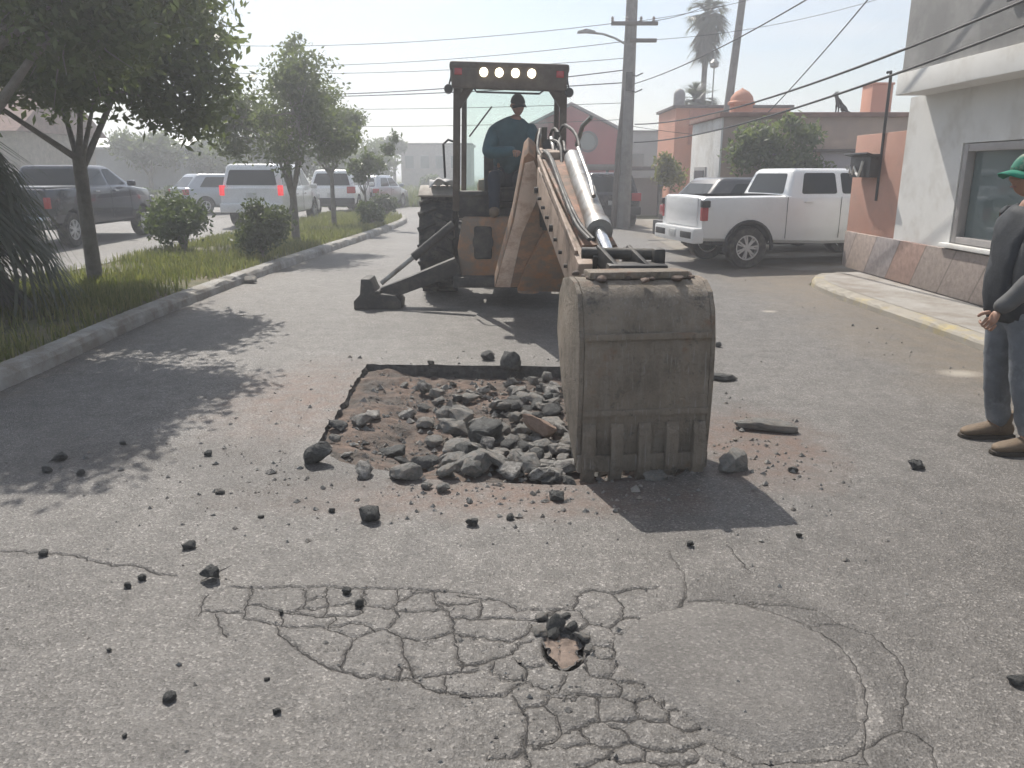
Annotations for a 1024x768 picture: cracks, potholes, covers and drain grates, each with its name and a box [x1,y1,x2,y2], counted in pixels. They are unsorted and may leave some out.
crack [198,586,938,768]
pothole [542,634,583,671]
pothole [319,364,686,485]
crack [0,551,175,577]
